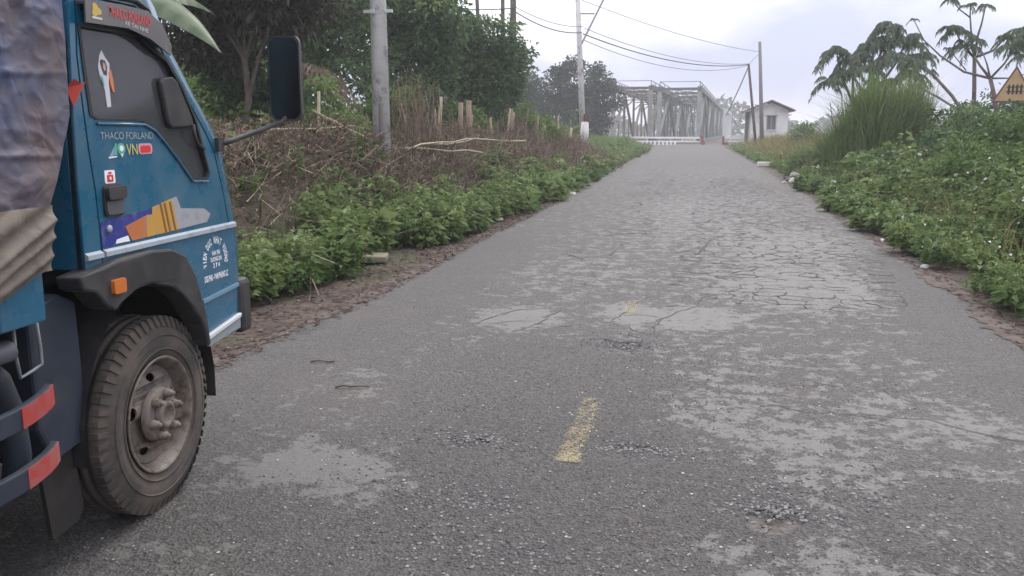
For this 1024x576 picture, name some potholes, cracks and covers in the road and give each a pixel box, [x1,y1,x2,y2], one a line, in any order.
crack [474,307,577,330]
crack [569,171,675,284]
crack [609,294,741,334]
pothole [586,338,649,355]
crack [673,177,908,312]
pothole [742,506,808,536]
pothole [614,444,655,453]
